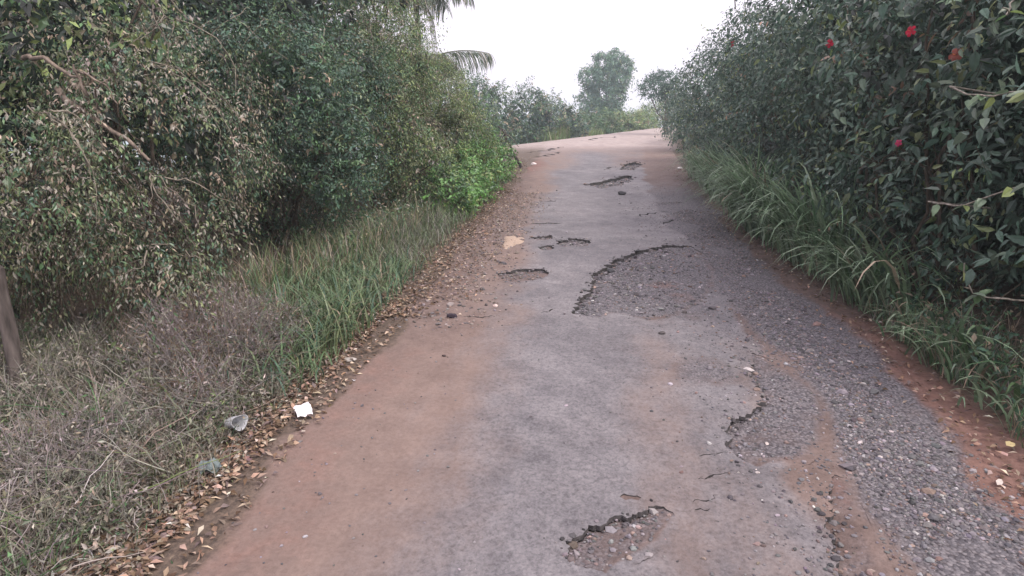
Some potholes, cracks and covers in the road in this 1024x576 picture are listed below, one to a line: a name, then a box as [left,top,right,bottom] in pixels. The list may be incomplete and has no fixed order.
pothole [572,245,718,322]
pothole [556,238,591,247]
pothole [498,269,549,284]
crack [693,452,728,511]
pothole [565,506,680,574]
pothole [587,175,633,189]
